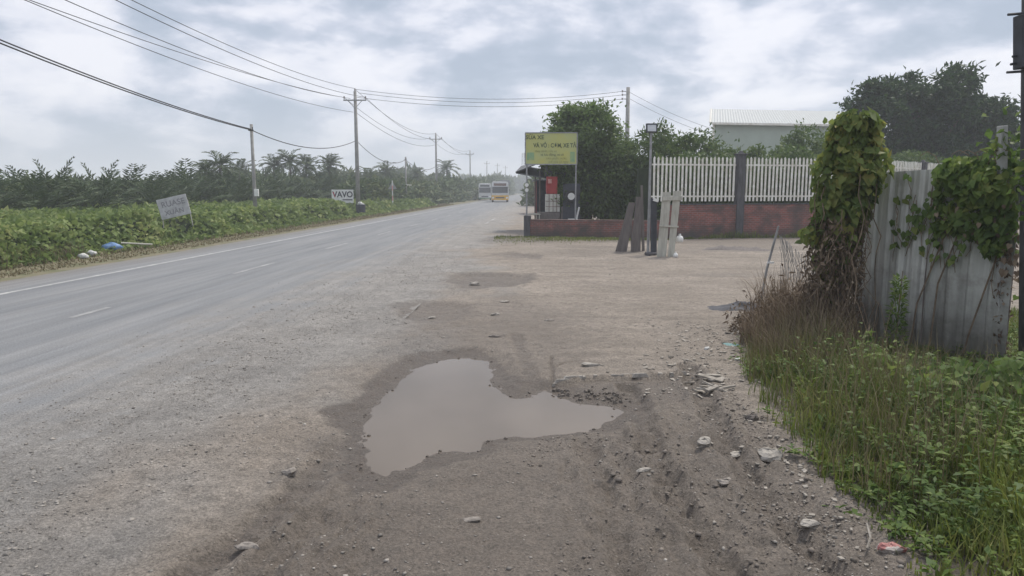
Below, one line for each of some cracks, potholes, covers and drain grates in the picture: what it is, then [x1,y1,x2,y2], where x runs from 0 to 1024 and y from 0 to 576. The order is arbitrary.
pothole [434,271,543,290]
pothole [383,299,486,326]
pothole [321,347,694,492]
